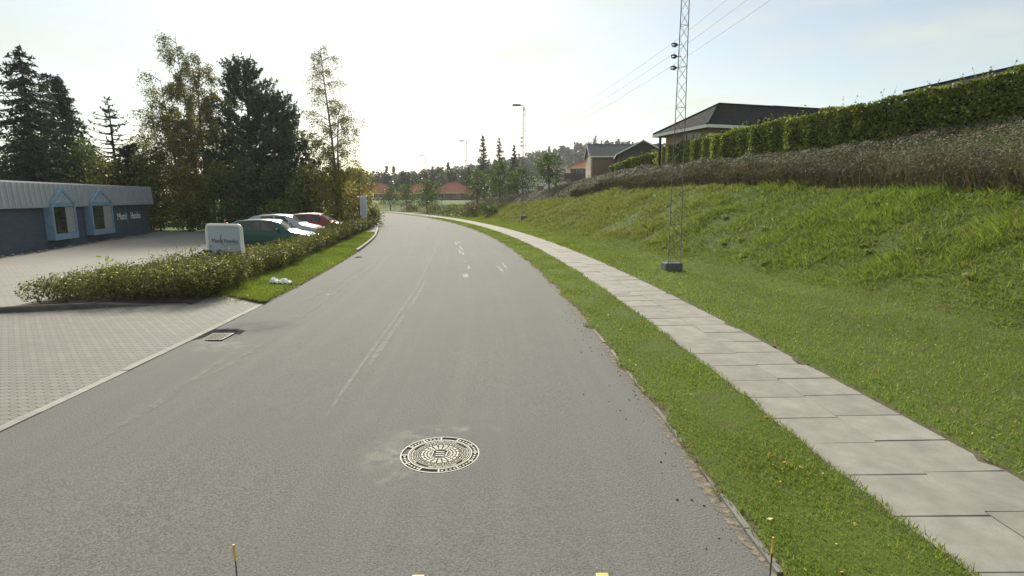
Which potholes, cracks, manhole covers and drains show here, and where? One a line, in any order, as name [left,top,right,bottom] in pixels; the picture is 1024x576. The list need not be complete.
drain grate [203,333,235,341]
manhole cover [400,437,479,473]
